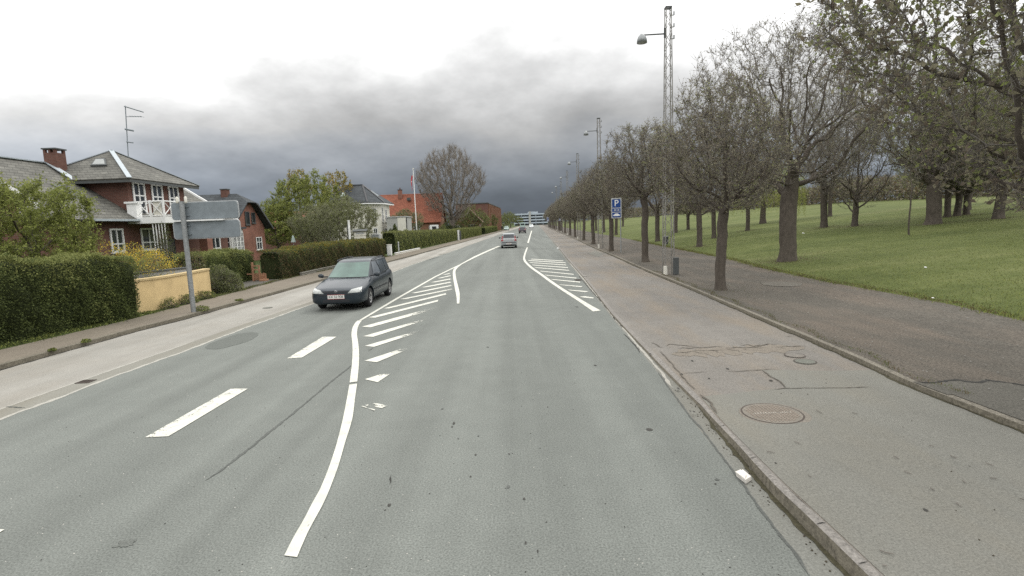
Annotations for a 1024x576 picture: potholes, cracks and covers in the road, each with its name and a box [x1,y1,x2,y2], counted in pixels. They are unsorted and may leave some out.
manhole cover [739,403,812,424]
